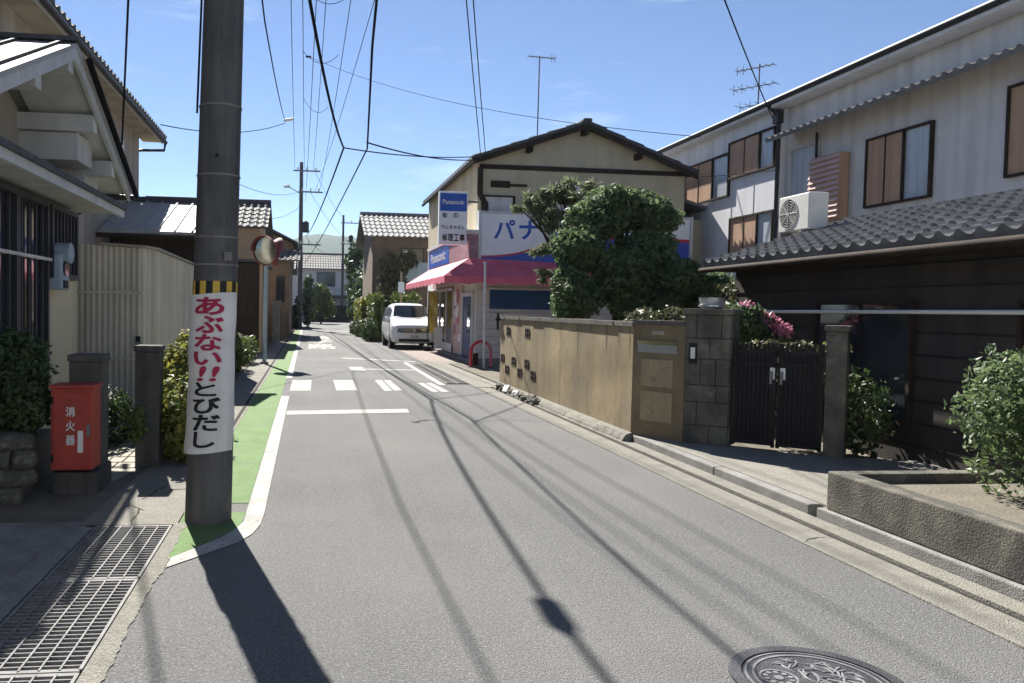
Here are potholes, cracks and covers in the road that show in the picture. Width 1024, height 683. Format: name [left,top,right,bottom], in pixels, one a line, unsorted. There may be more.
manhole cover [728,646,905,683]
crack [122,484,176,524]
drain grate [44,525,172,581]
drain grate [0,672,80,683]
drain grate [0,579,139,675]
